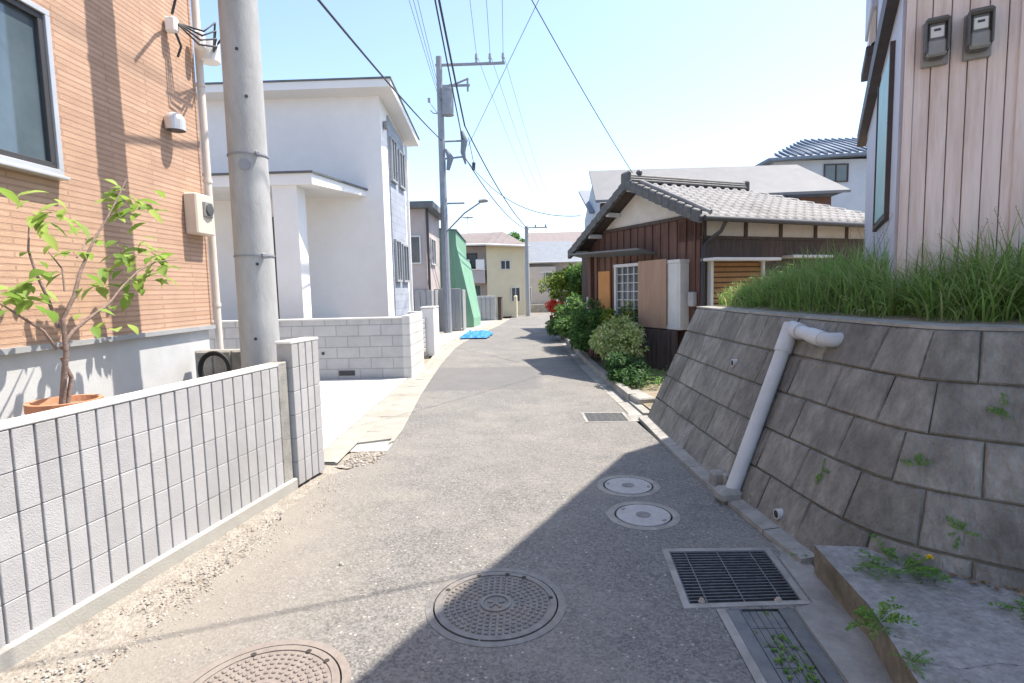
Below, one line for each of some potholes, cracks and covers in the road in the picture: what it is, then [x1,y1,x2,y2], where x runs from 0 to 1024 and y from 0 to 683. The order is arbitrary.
manhole cover [607,501,681,530]
drain grate [662,547,811,654]
drain grate [581,412,632,423]
manhole cover [597,475,660,497]
manhole cover [184,639,351,683]
manhole cover [425,568,566,648]
